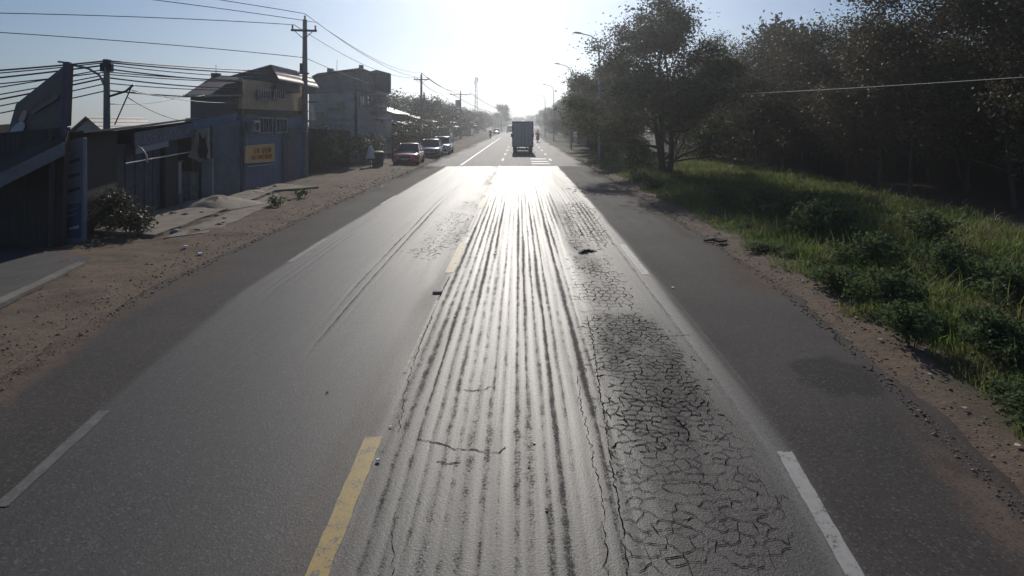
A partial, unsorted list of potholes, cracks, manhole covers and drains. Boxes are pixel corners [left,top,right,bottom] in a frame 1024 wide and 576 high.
crack [577,313,792,576]
crack [559,202,633,316]
crack [401,204,477,260]
crack [418,439,506,464]
